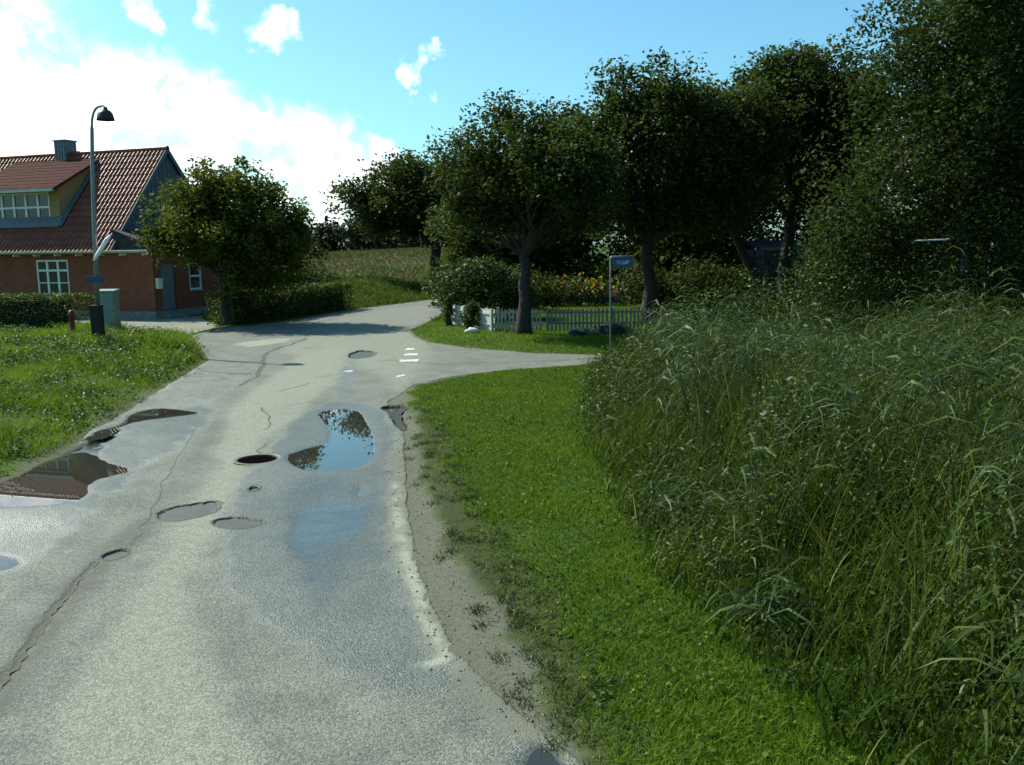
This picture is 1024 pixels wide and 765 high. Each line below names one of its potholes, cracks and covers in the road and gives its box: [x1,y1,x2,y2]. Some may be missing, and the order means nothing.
pothole [210,516,268,530]
pothole [154,500,224,521]
pothole [381,405,409,431]
pothole [98,548,131,561]
crack [130,427,197,547]
crack [200,338,315,454]
crack [0,561,99,691]
pothole [347,350,378,359]
